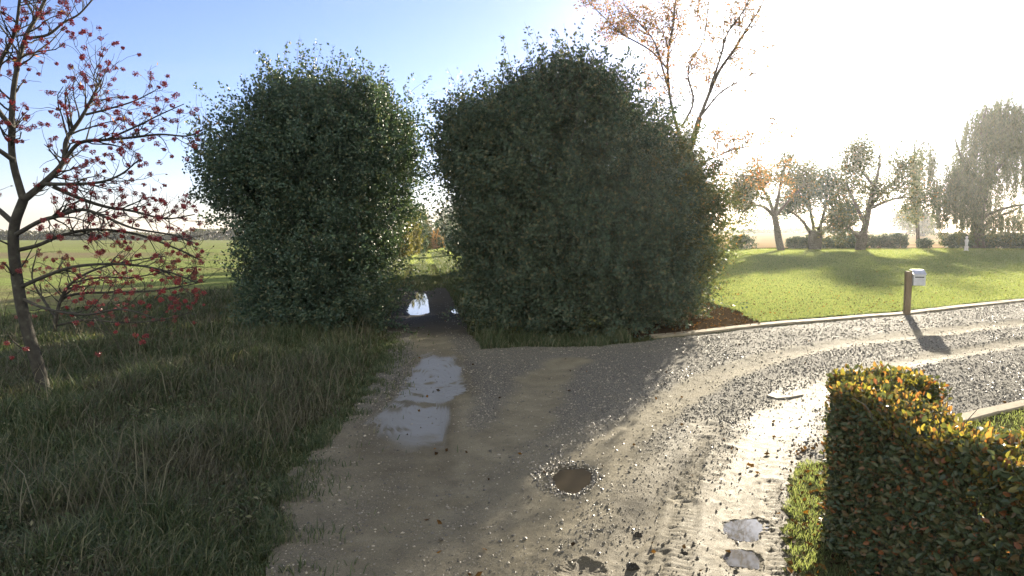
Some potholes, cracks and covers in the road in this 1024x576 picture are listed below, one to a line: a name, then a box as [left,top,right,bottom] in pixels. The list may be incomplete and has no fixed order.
pothole [547,464,595,495]
pothole [719,549,764,570]
pothole [718,516,774,542]
